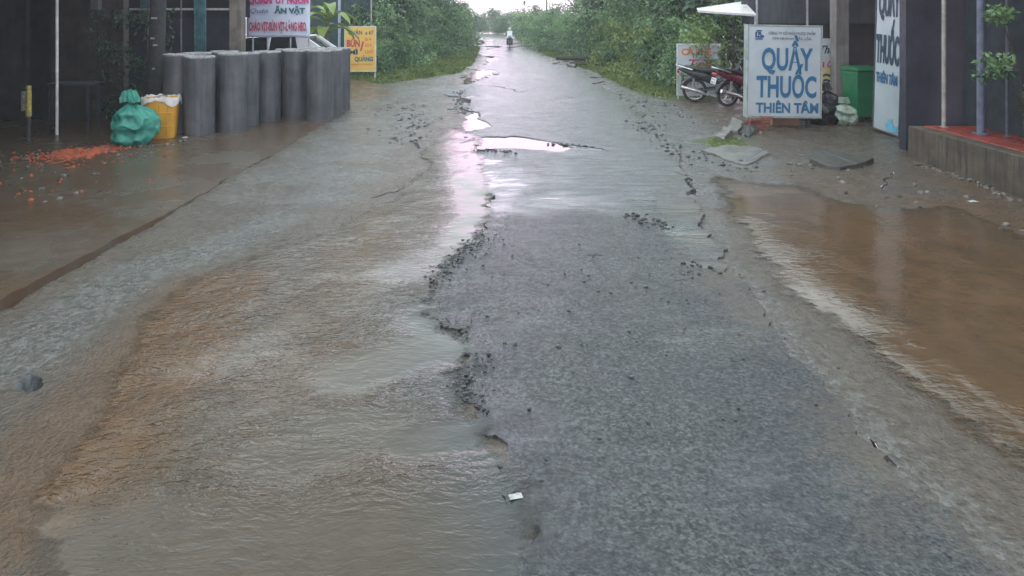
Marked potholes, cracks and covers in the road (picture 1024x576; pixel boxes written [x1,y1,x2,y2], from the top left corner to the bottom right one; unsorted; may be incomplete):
pothole [472,136,574,152]
pothole [461,111,491,132]
